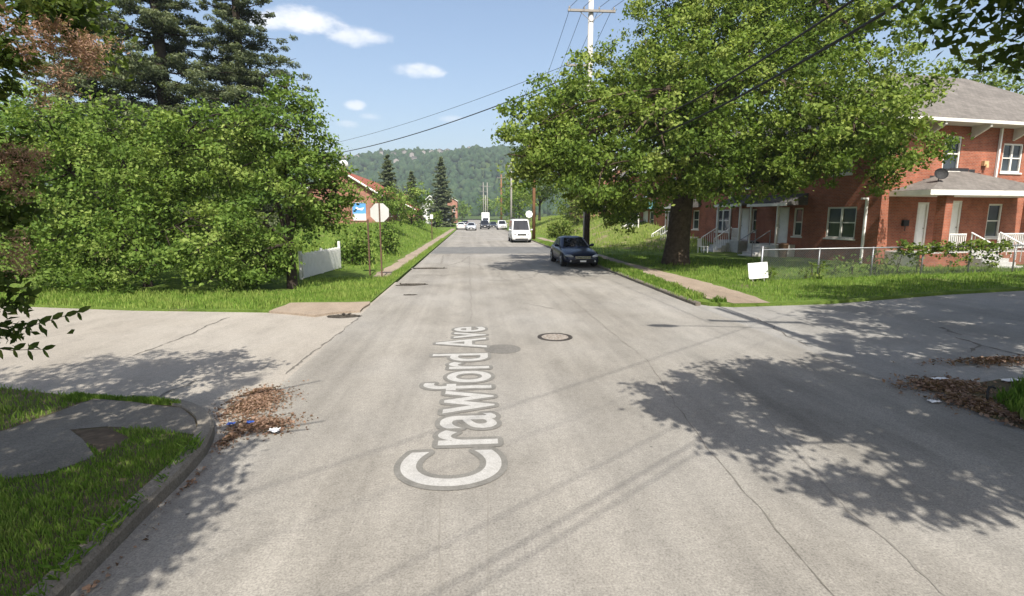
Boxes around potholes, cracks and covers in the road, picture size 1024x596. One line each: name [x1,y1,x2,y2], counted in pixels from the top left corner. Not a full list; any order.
manhole cover [537,333,573,341]
crack [286,317,360,374]
crack [135,317,229,355]
crack [938,327,1024,355]
